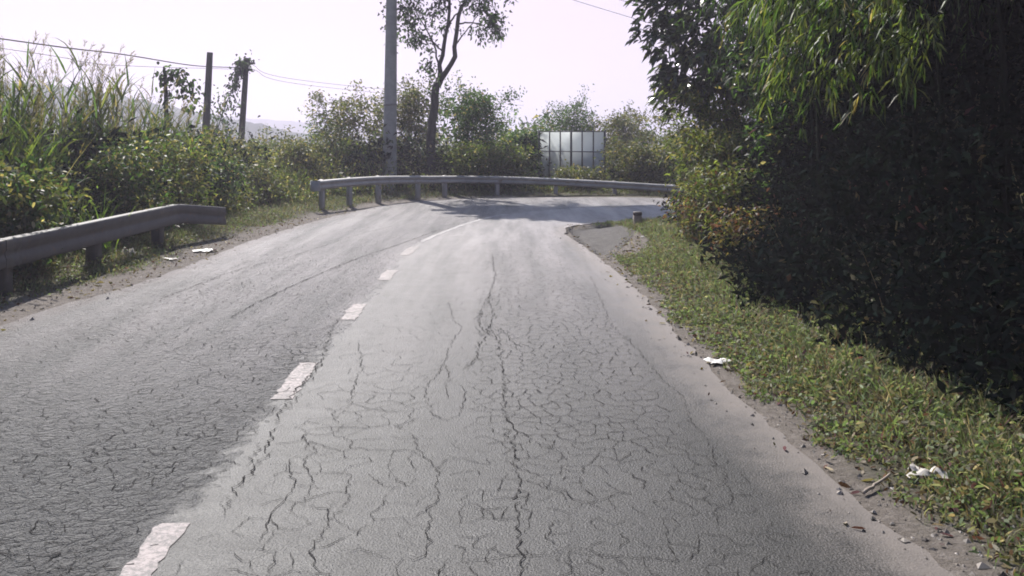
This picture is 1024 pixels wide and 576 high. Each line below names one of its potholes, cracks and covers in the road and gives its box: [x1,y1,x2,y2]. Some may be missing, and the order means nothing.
crack [0,224,442,576]
crack [177,222,812,576]
